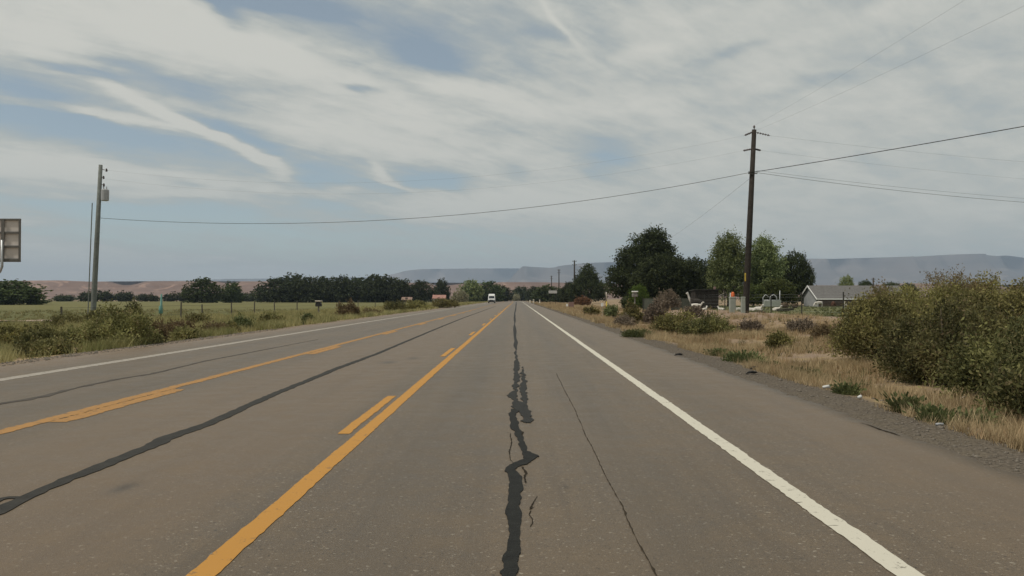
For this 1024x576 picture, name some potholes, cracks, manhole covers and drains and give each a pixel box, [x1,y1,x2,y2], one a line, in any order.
crack [556,373,657,576]
